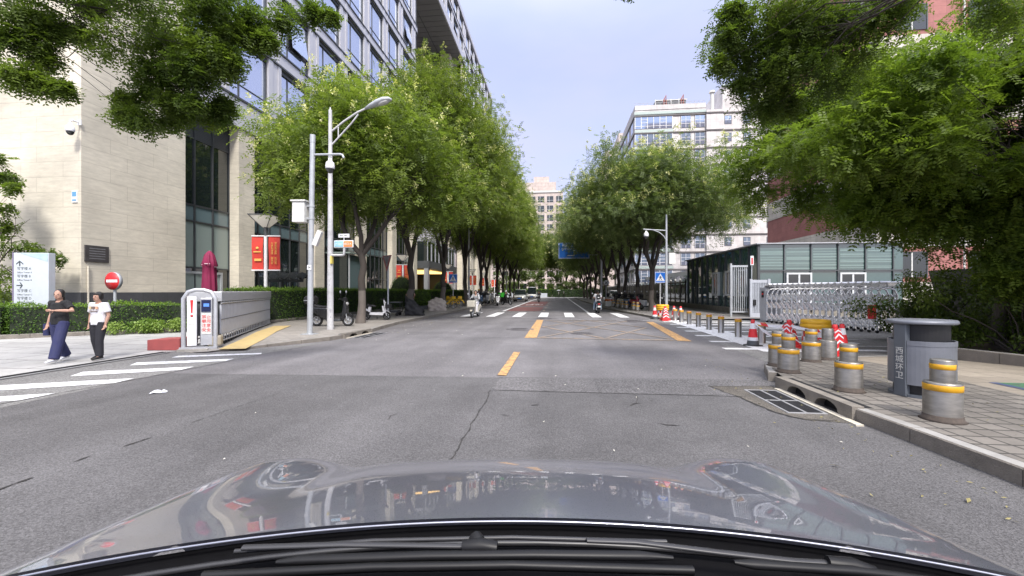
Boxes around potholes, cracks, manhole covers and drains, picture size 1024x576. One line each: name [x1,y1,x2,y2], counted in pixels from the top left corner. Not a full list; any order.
drain grate [744,389,828,414]
crack [449,390,509,460]
